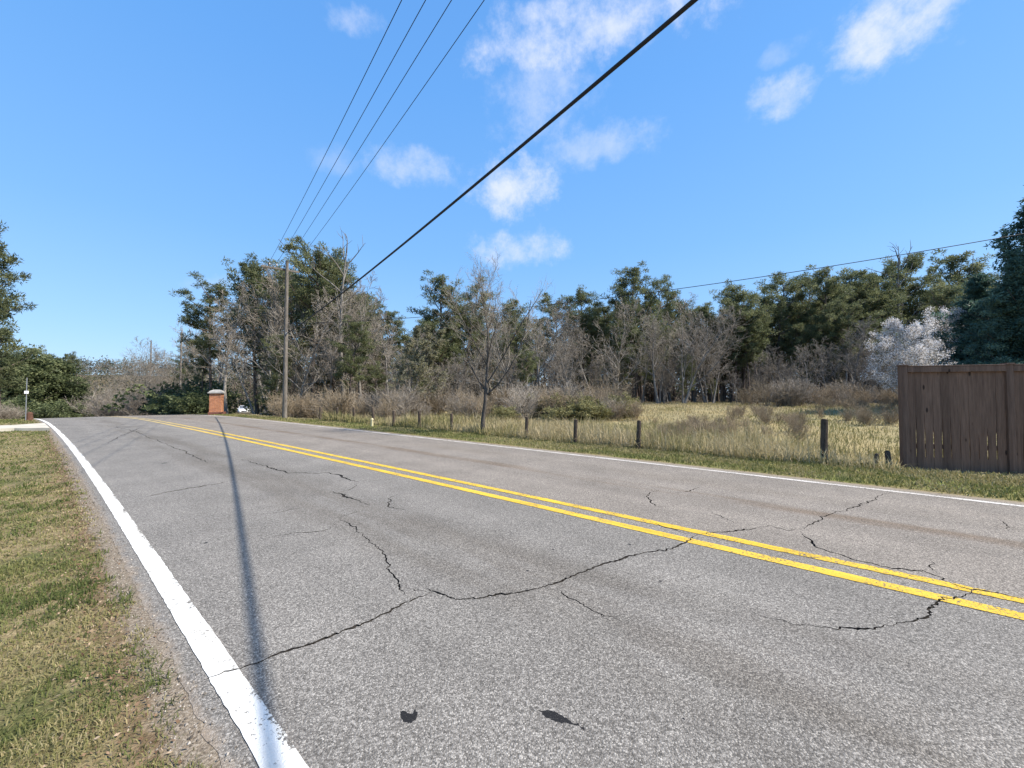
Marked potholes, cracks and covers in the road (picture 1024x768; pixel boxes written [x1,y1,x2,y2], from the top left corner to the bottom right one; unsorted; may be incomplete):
crack [192,493,1023,686]
